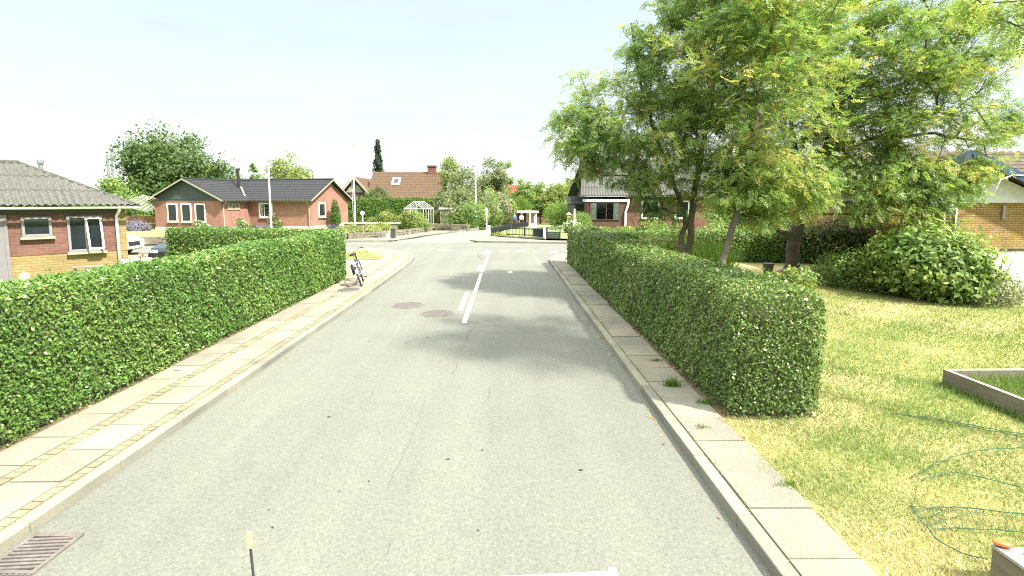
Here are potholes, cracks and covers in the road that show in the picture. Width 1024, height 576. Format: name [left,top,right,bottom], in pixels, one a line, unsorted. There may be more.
drain grate [0,532,85,576]
